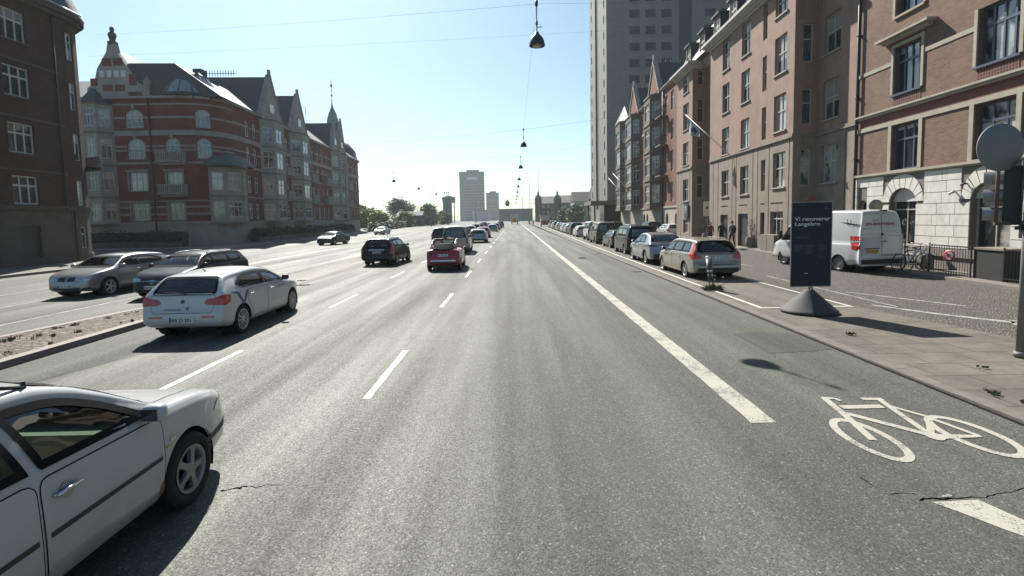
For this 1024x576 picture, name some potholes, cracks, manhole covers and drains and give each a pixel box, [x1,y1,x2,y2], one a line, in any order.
crack [860,477,1024,502]
crack [221,484,283,492]
